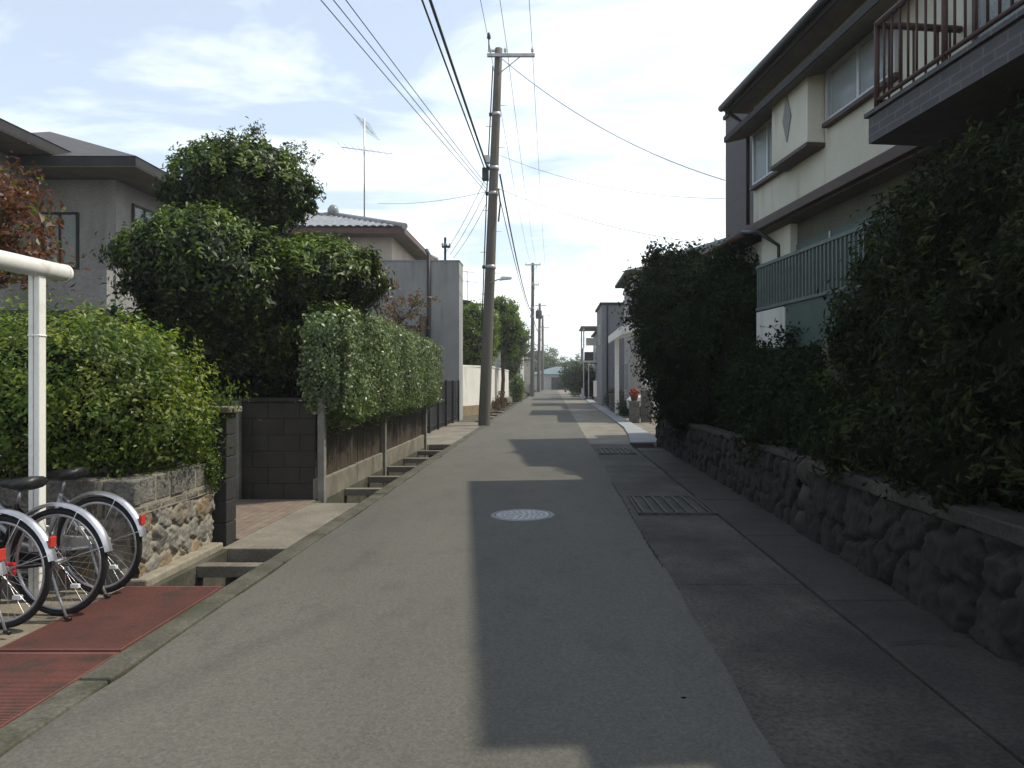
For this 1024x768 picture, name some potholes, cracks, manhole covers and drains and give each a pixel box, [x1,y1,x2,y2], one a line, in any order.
manhole cover [491,509,555,521]
drain grate [627,496,718,514]
